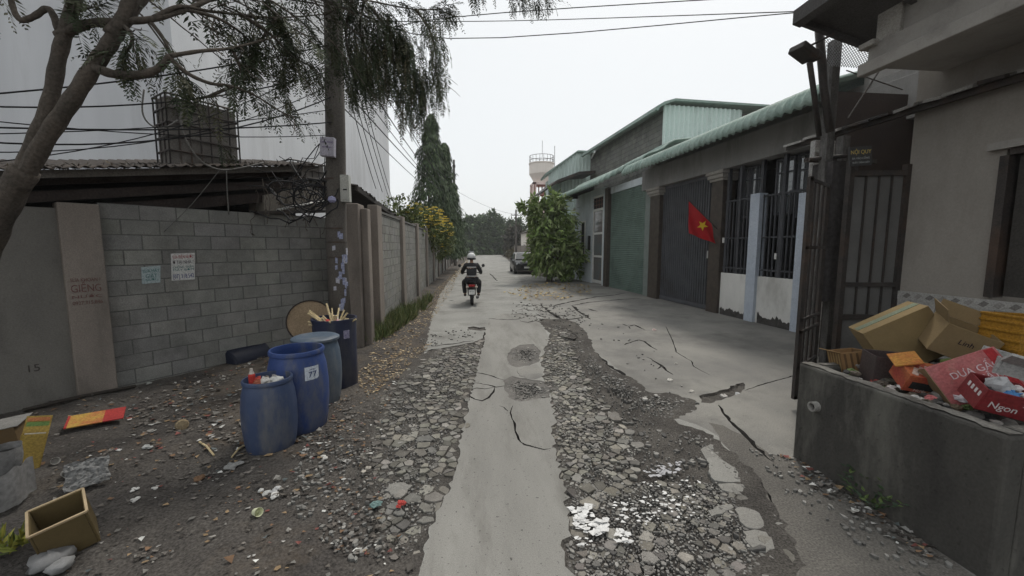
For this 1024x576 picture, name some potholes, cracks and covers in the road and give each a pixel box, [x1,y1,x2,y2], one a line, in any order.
pothole [538,318,806,576]
pothole [507,344,541,367]
crack [471,373,553,450]
pothole [503,376,551,402]
crack [599,324,700,375]
